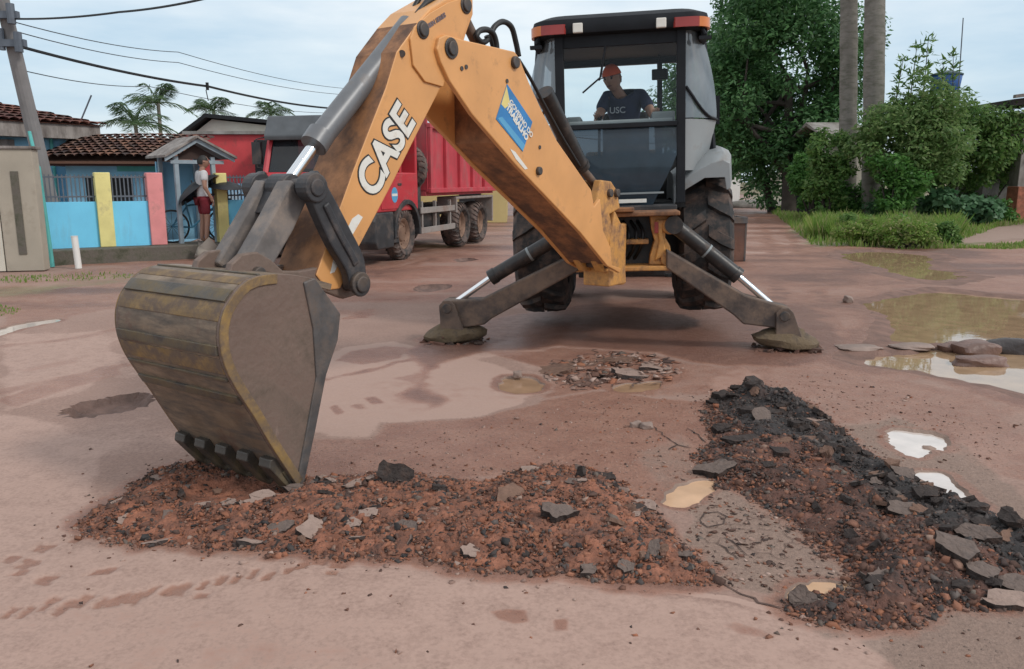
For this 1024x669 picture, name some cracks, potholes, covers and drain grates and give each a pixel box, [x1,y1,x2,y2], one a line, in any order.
crack [705,576,781,608]
pothole [884,428,951,457]
pothole [660,478,719,504]
pothole [784,579,852,598]
pothole [566,373,611,387]
pothole [914,470,972,497]
pothole [498,376,545,390]
pothole [832,287,1024,400]
crack [700,511,840,565]
crack [655,427,706,449]
